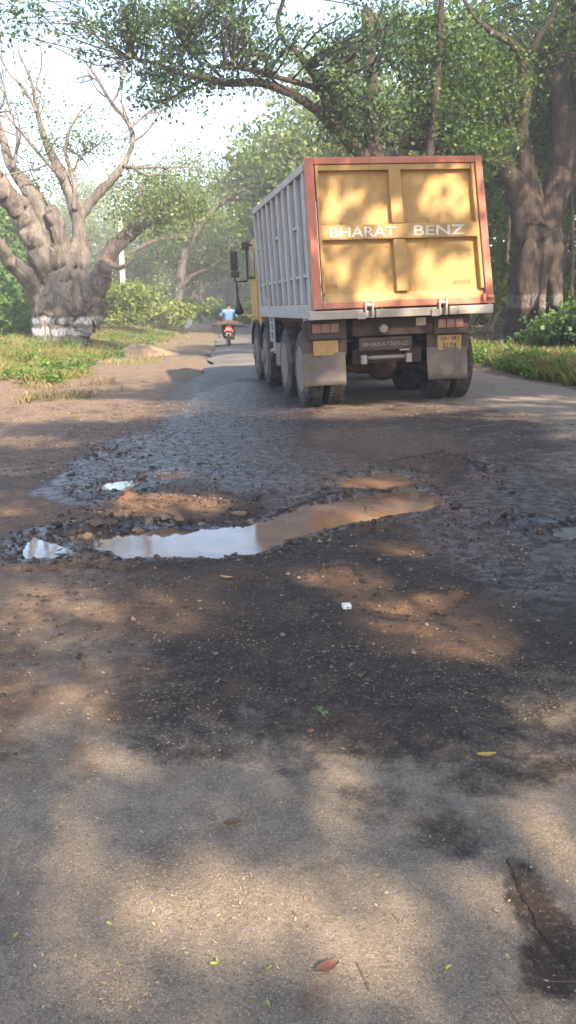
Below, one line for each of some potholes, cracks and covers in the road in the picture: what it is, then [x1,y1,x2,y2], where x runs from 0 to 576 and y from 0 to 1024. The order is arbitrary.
pothole [18,536,78,559]
pothole [148,468,198,480]
pothole [549,522,576,541]
pothole [335,469,418,493]
pothole [97,479,138,490]
pothole [92,488,449,559]
crack [505,859,576,976]
